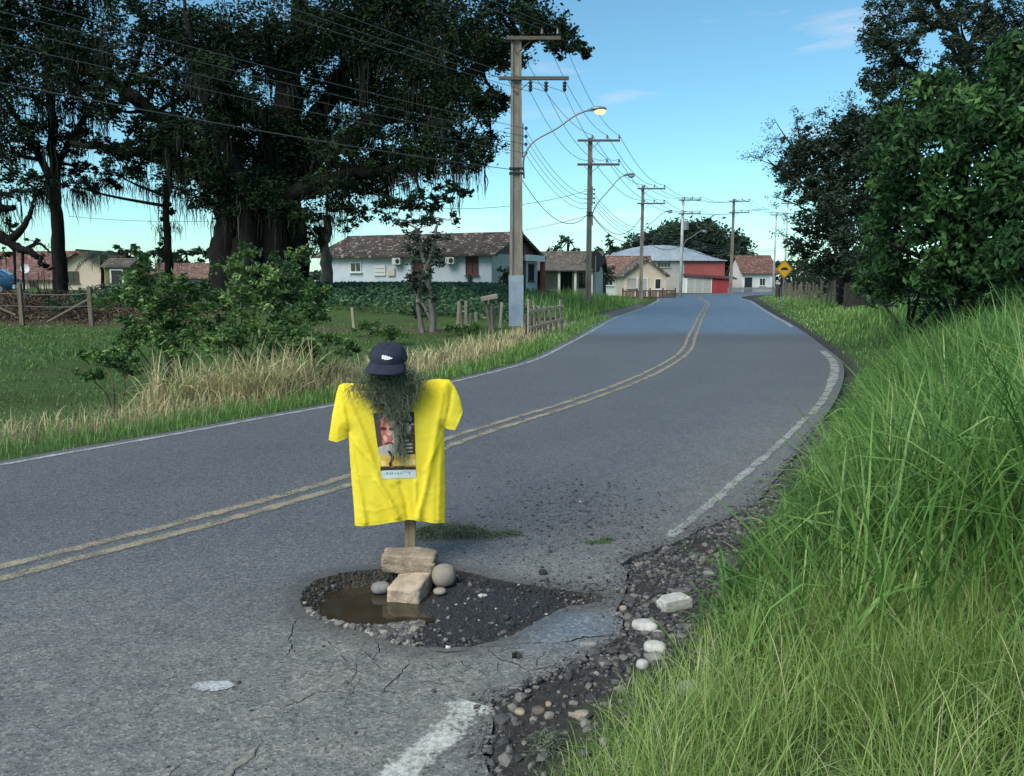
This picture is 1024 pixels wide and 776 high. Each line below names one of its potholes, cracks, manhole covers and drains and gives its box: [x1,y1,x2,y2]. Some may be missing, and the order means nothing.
pothole [300,569,608,649]
crack [257,635,614,716]
crack [277,617,301,662]
